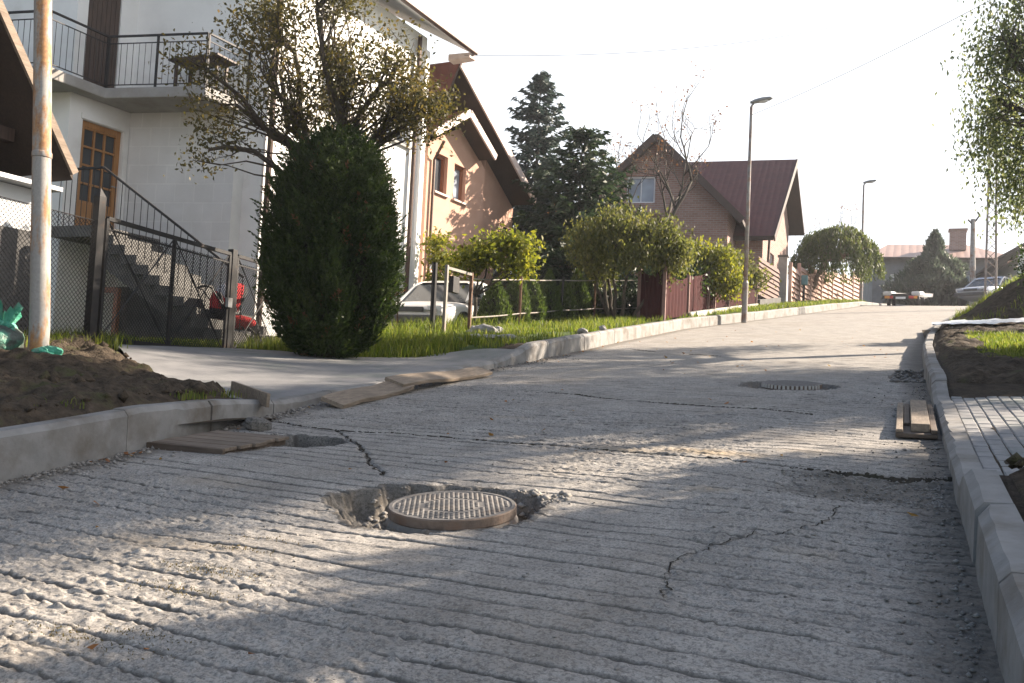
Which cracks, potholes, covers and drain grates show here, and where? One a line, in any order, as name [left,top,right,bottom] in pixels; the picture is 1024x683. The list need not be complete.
pothole [320,483,558,535]
pothole [271,434,350,448]
crack [524,391,813,415]
manhole cover [386,491,518,534]
manhole cover [761,380,822,390]
crack [269,420,952,484]
crack [659,506,840,596]
